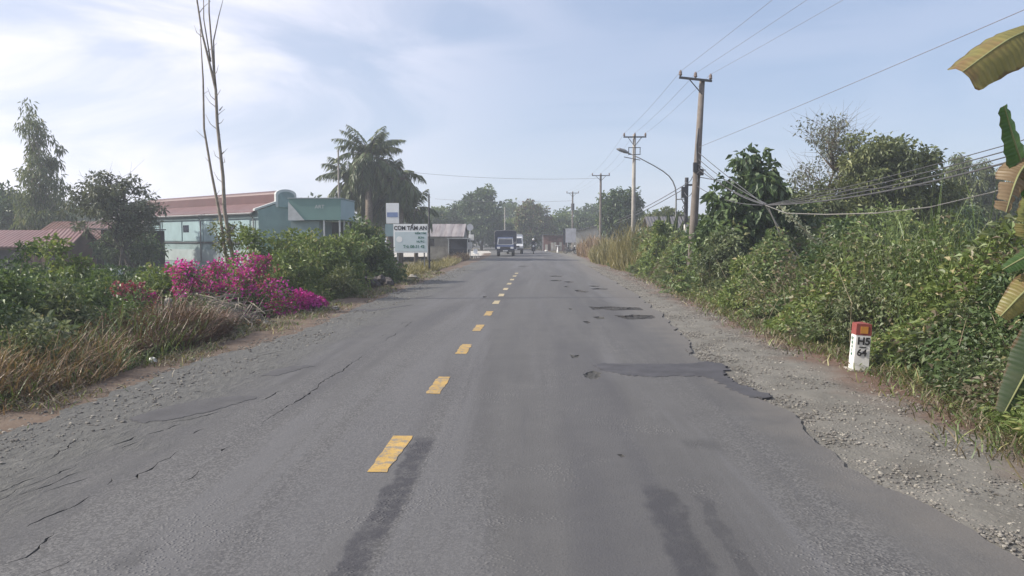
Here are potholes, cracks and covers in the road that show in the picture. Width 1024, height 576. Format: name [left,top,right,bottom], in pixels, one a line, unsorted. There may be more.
crack [112,413,213,448]
pothole [583,371,601,379]
crack [263,356,362,422]
crack [105,451,178,486]
crack [1,435,93,576]
